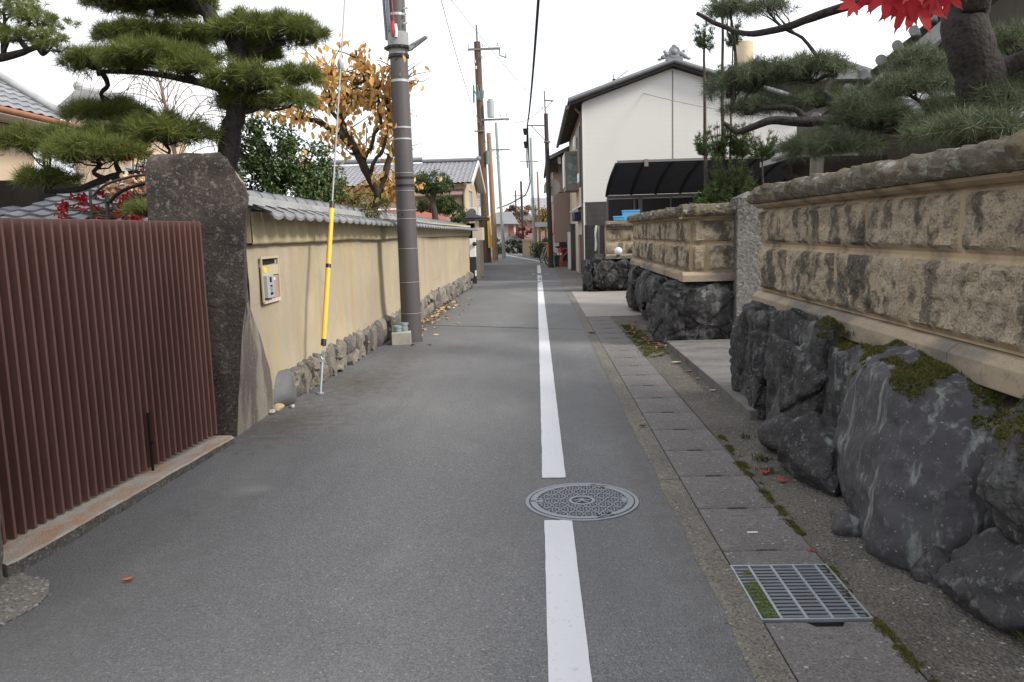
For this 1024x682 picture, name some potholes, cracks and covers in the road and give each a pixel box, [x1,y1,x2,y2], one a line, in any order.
drain grate [730,564,874,627]
manhole cover [526,483,639,522]
